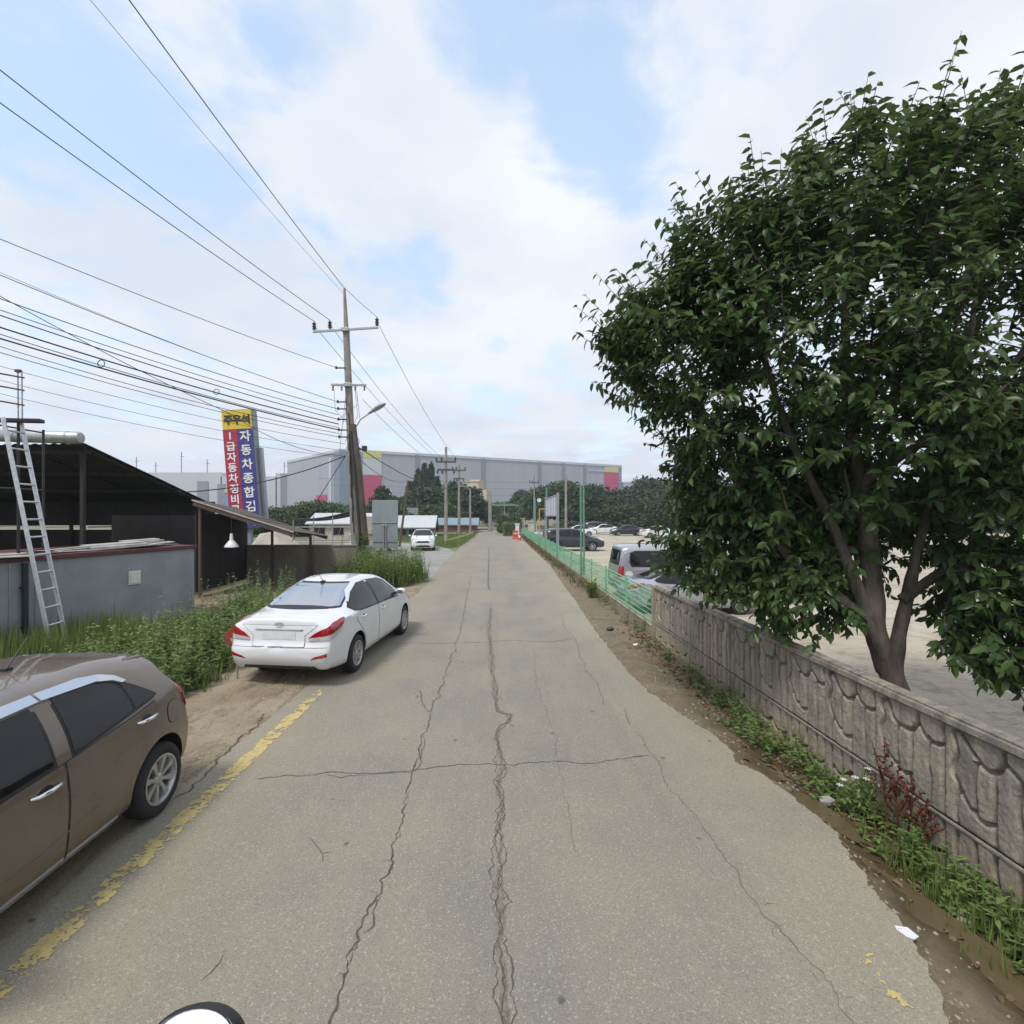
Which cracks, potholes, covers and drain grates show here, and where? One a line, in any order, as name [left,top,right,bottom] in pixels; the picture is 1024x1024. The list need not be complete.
crack [254,586,854,1024]
crack [173,715,264,800]
